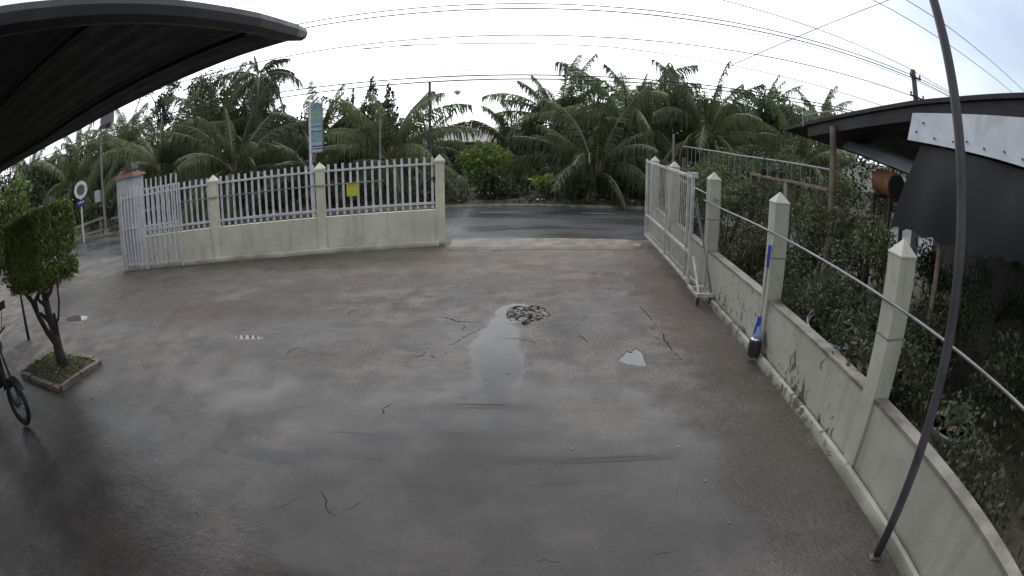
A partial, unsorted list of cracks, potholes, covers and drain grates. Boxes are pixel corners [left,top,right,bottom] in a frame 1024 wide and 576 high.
crack [639,306,683,360]
pothole [619,348,646,366]
pothole [506,306,551,327]
